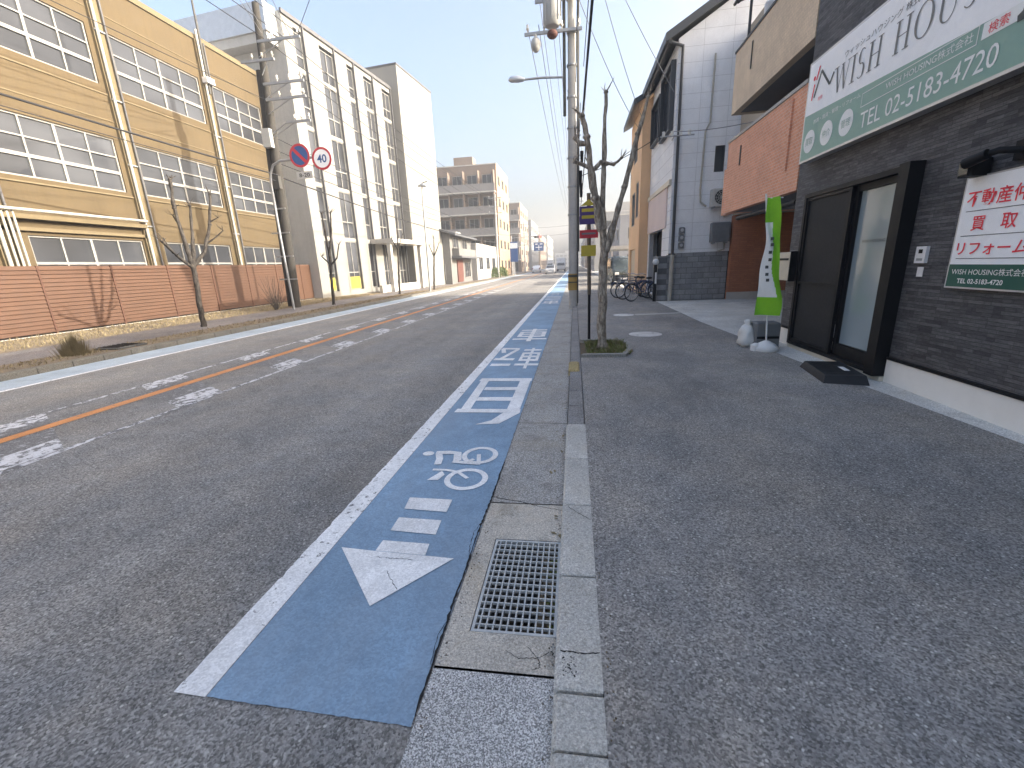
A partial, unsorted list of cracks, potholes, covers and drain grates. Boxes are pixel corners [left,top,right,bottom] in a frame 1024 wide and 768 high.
drain grate [470,539,561,638]
crack [378,462,586,716]
